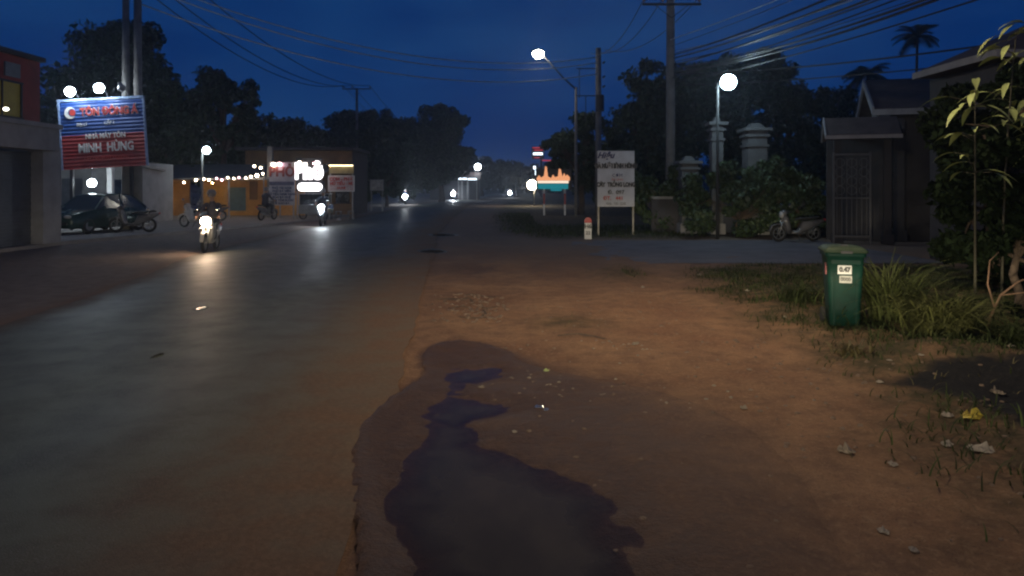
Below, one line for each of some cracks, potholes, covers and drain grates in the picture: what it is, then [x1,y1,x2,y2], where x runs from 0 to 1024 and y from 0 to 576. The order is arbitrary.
pothole [351,340,851,576]
